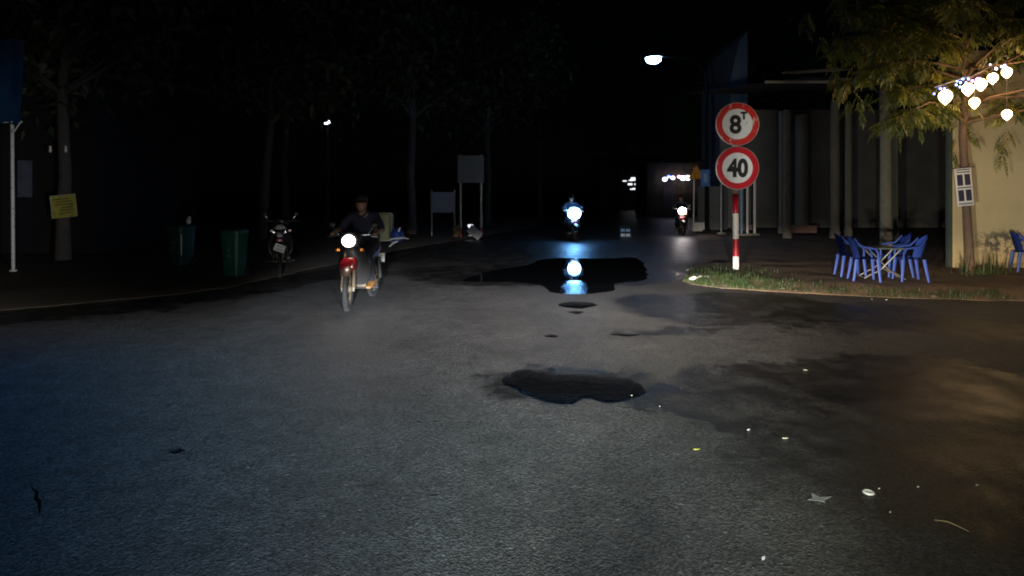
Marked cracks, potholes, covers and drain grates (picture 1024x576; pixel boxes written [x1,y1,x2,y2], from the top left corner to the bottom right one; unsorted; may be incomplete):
pothole [558,301,597,309]
crack [31,485,41,514]
pothole [502,369,646,405]
